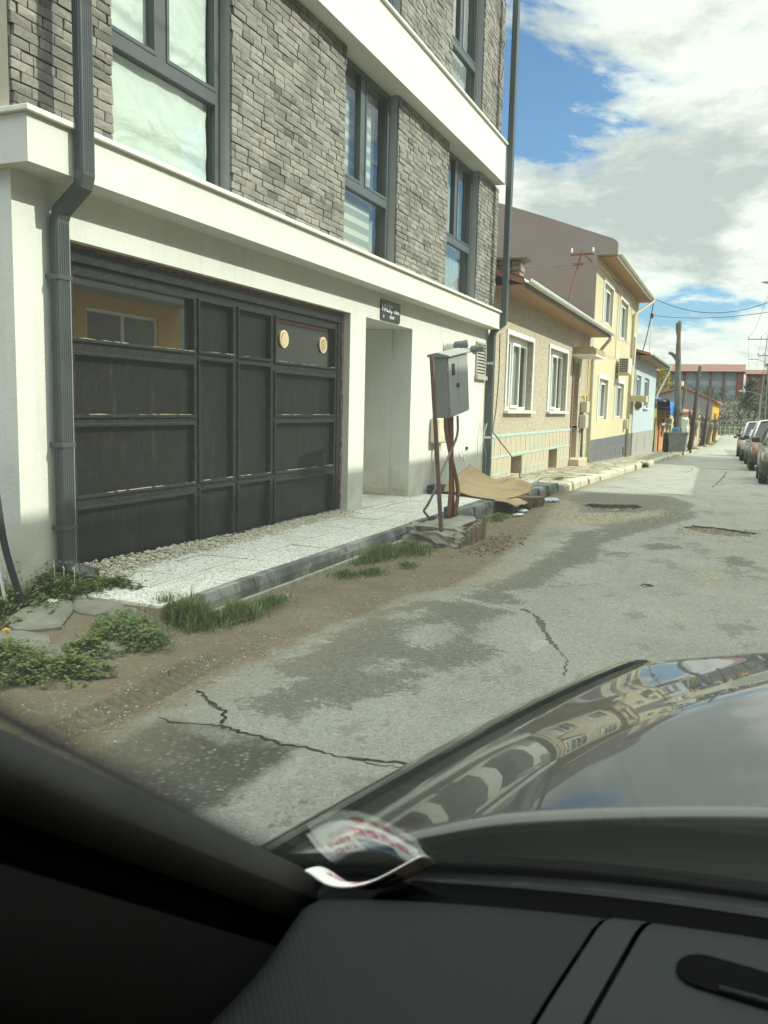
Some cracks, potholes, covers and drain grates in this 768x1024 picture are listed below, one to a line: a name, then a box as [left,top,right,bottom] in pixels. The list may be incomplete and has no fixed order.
crack [520,609,569,676]
pothole [685,525,756,537]
crack [158,690,407,768]
pothole [583,504,642,512]
